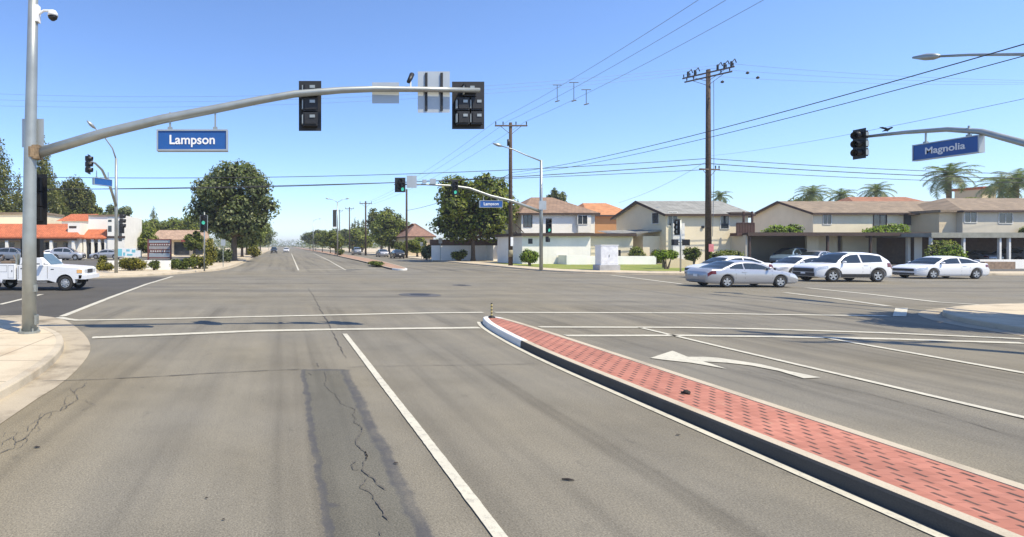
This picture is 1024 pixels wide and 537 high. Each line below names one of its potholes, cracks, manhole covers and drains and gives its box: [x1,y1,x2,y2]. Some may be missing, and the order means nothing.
crack [310,363,389,534]
crack [0,290,539,453]
